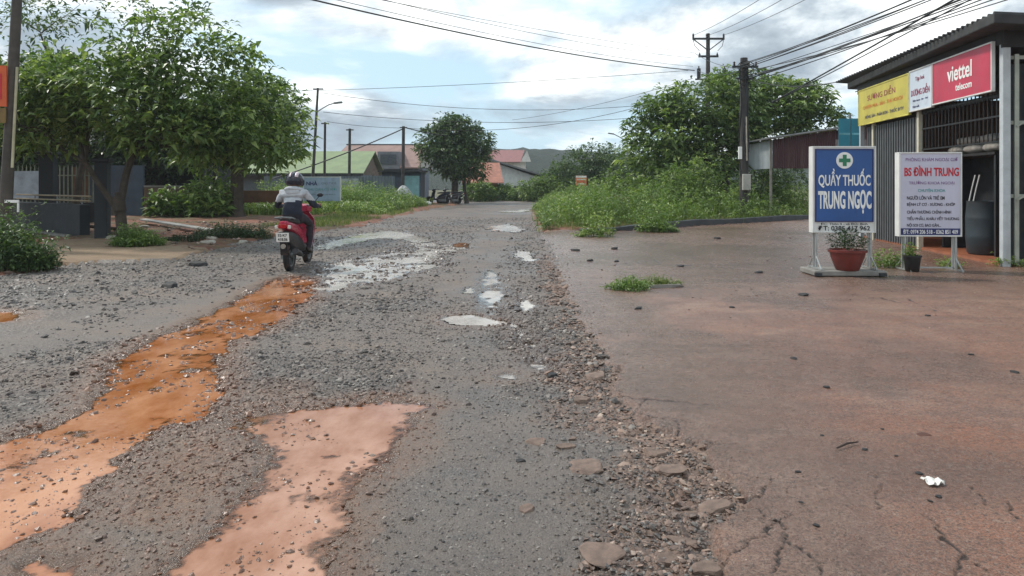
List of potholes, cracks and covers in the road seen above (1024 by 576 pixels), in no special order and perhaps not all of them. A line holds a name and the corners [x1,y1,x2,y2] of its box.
pothole [313,230,441,251]
crack [718,477,834,576]
pothole [437,313,509,326]
pothole [312,242,477,293]
crack [919,481,1024,576]
pothole [508,250,540,262]
pothole [473,269,515,315]
pothole [484,223,531,233]
pothole [512,297,540,314]
crack [617,391,739,445]
